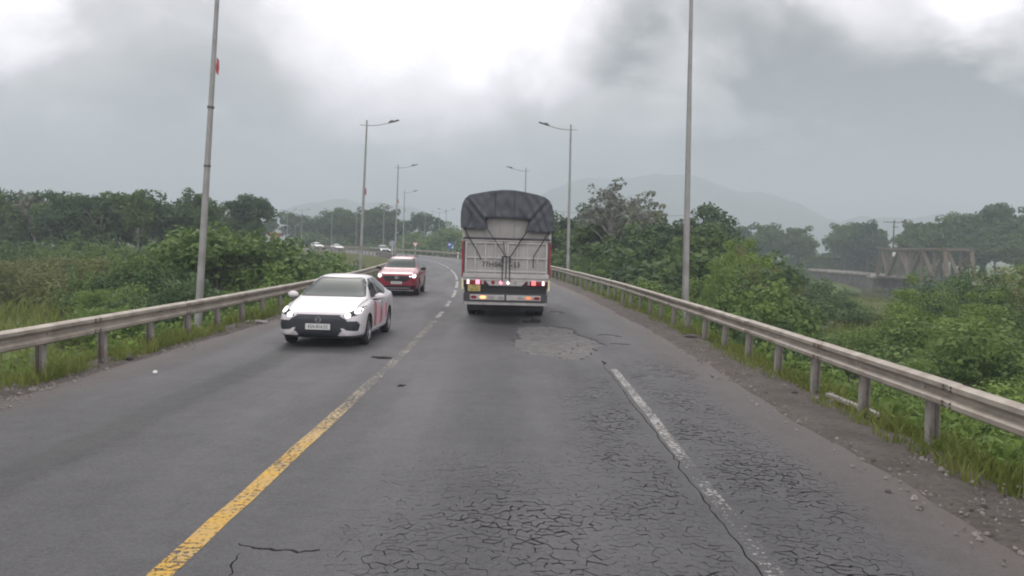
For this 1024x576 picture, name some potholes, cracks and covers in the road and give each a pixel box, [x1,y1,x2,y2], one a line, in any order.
crack [229,353,934,576]
